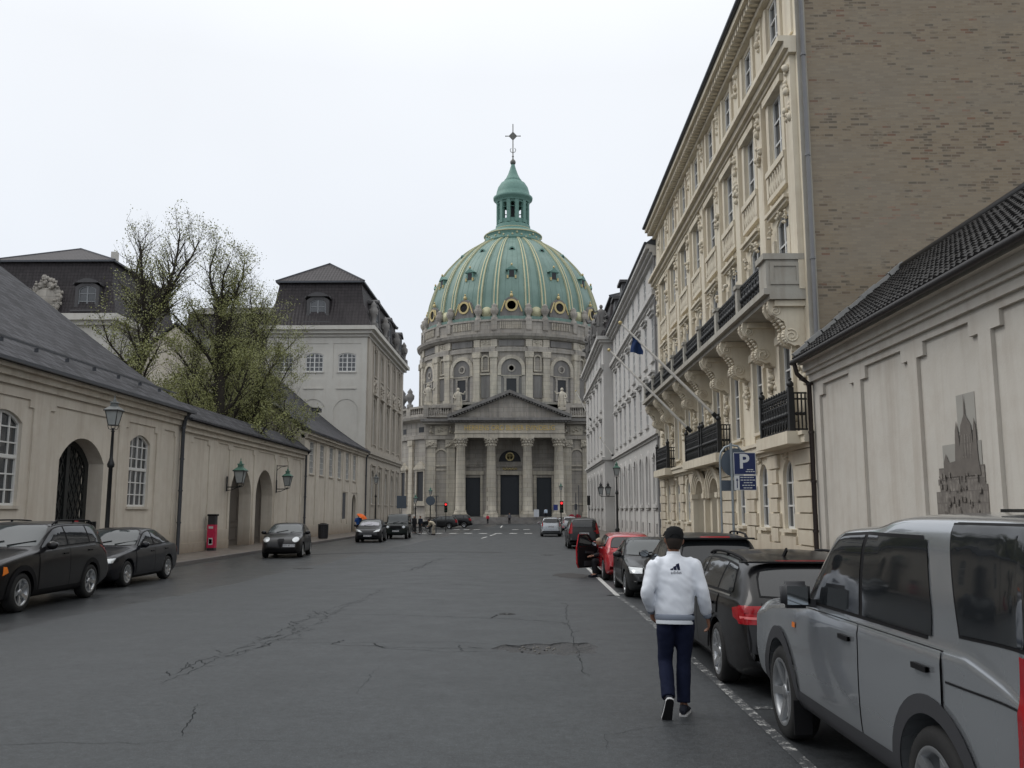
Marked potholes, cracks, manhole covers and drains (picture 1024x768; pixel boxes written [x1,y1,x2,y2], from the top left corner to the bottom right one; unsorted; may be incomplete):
pothole [492,642,598,656]
crack [149,561,626,685]
